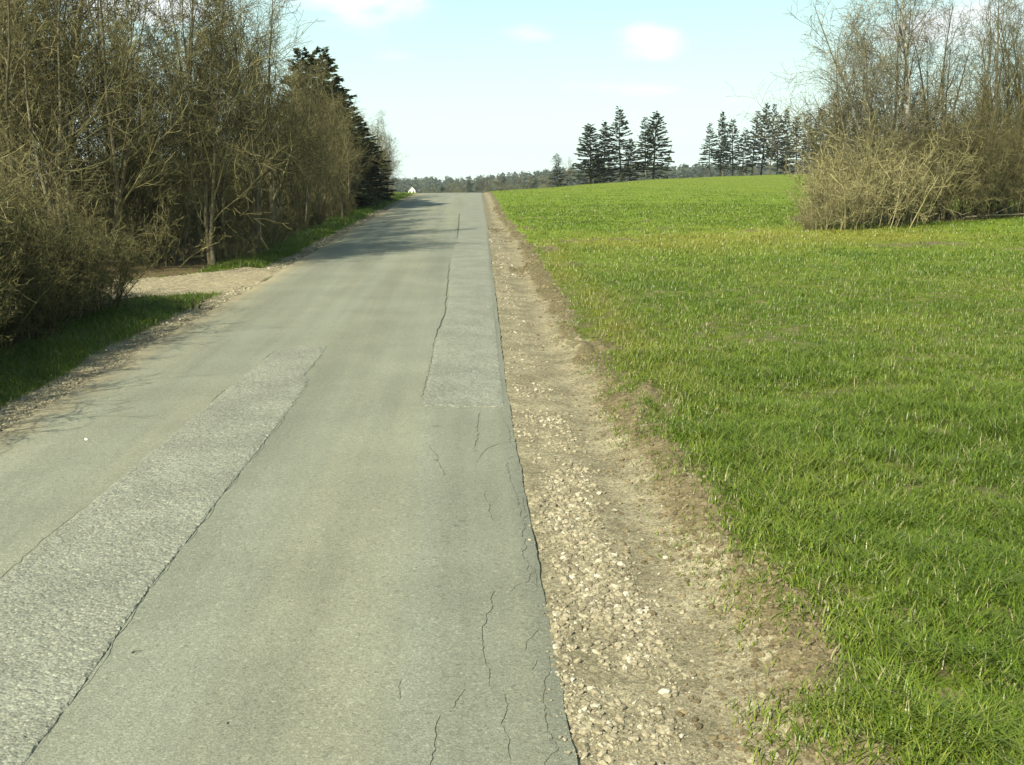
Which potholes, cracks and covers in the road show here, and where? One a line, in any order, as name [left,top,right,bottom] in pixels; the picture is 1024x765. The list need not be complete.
crack [430,691,464,765]
crack [421,262,450,401]
crack [474,412,538,590]
crack [525,628,560,764]
crack [482,589,511,759]
